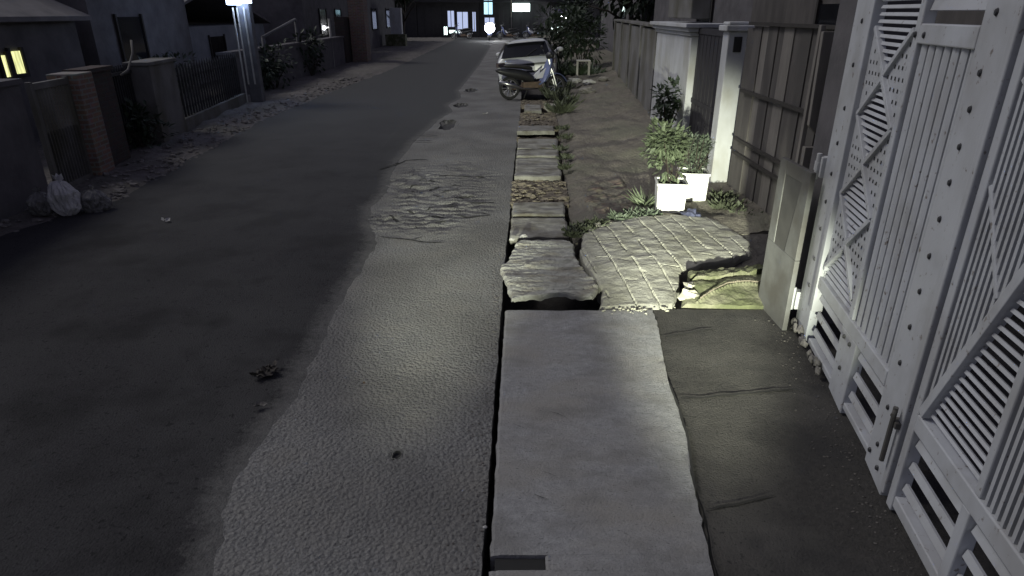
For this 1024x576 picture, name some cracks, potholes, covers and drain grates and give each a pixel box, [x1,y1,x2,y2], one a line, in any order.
pothole [436,118,461,132]
crack [380,159,493,243]
